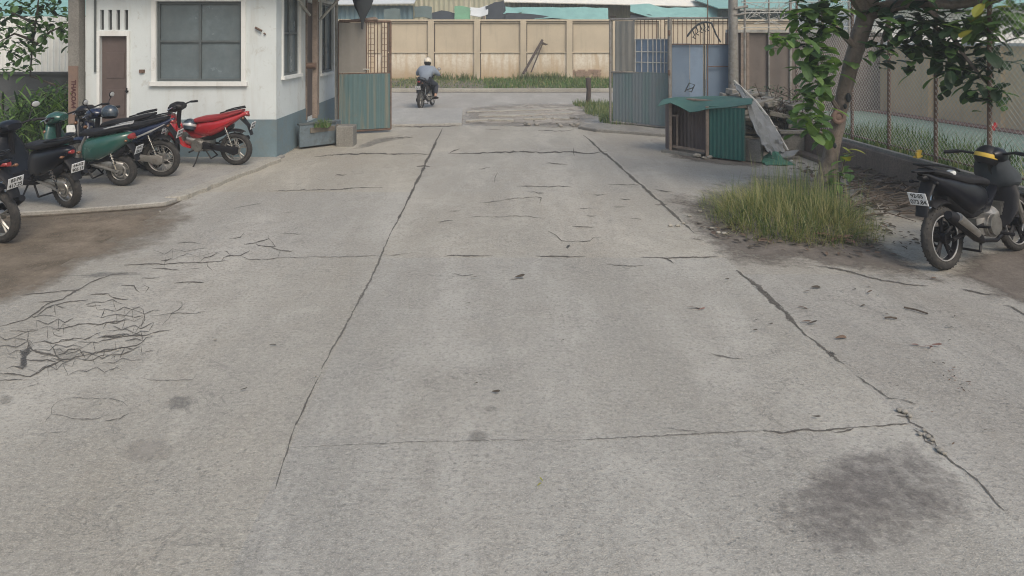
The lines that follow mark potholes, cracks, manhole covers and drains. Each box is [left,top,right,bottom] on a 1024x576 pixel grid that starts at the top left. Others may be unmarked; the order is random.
crack [815,265,926,286]
crack [46,397,129,433]
crack [1,233,373,386]
